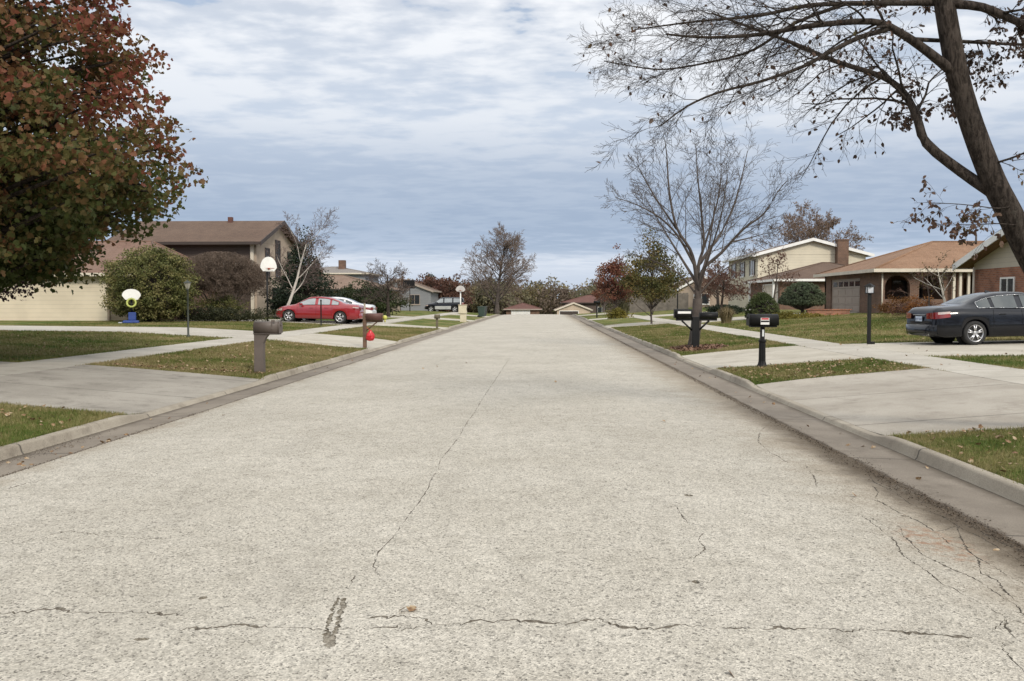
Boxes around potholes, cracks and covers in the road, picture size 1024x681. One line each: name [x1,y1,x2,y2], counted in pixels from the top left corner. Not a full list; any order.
crack [348,371,501,589]
crack [6,607,972,639]
crack [848,474,1024,670]
